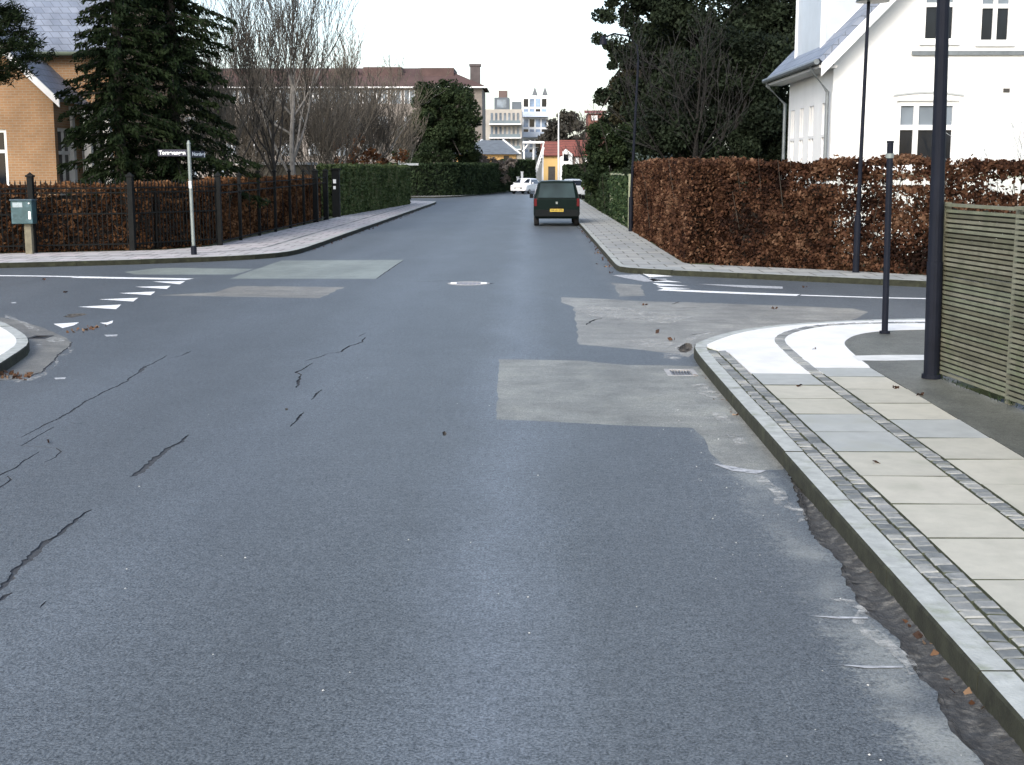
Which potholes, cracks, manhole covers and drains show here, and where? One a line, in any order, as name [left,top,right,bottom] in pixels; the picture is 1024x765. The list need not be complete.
crack [0,351,191,488]
crack [290,333,365,427]
crack [9,342,73,380]
crack [0,510,91,607]
